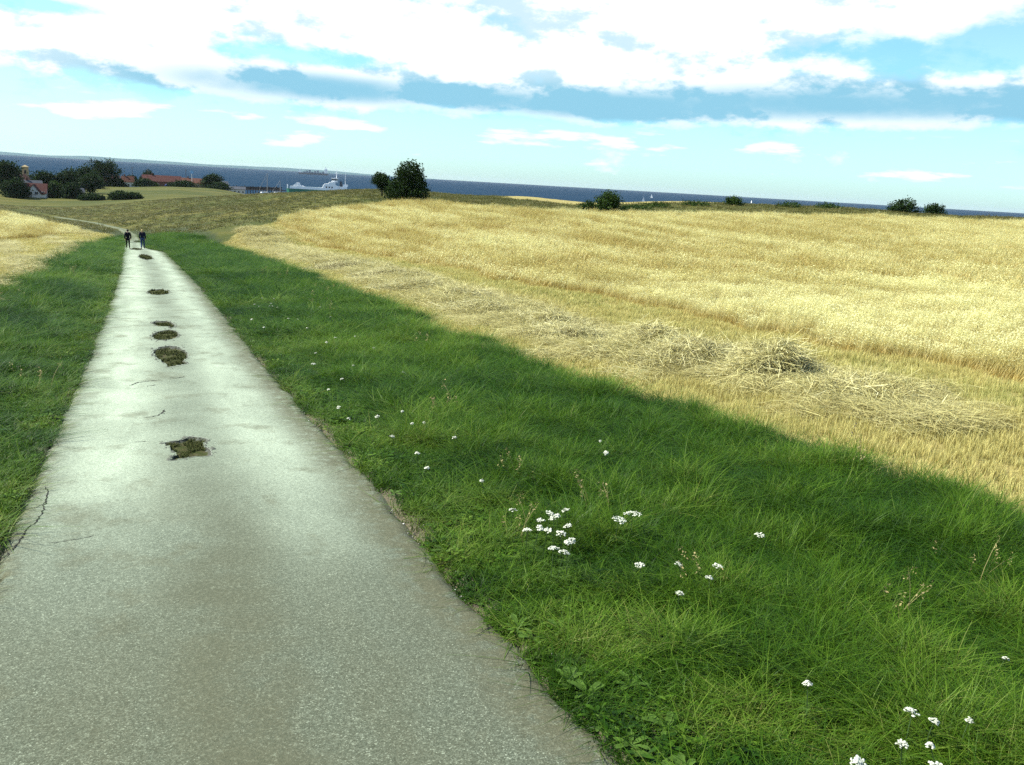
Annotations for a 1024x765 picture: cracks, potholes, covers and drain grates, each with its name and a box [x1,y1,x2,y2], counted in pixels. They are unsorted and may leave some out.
crack [2,487,49,559]
pothole [145,288,171,296]
pothole [150,320,177,329]
pothole [149,329,181,342]
pothole [159,435,216,461]
pothole [151,344,192,369]
